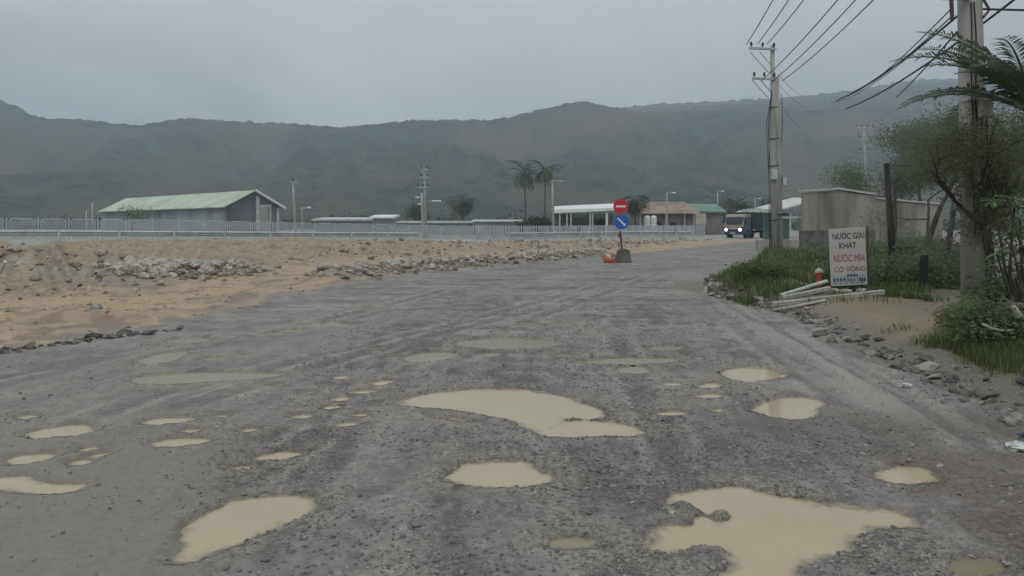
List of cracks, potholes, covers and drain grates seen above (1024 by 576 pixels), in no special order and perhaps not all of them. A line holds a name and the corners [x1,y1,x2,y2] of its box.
pothole [119,368,293,385]
pothole [742,392,833,420]
pothole [152,483,330,566]
pothole [433,452,567,489]
pothole [130,348,197,365]
pothole [140,432,222,448]
pothole [611,364,656,374]
pothole [448,335,567,350]
pothole [216,445,312,471]
pothole [625,479,934,576]
pothole [0,446,68,466]
pothole [859,458,952,485]
